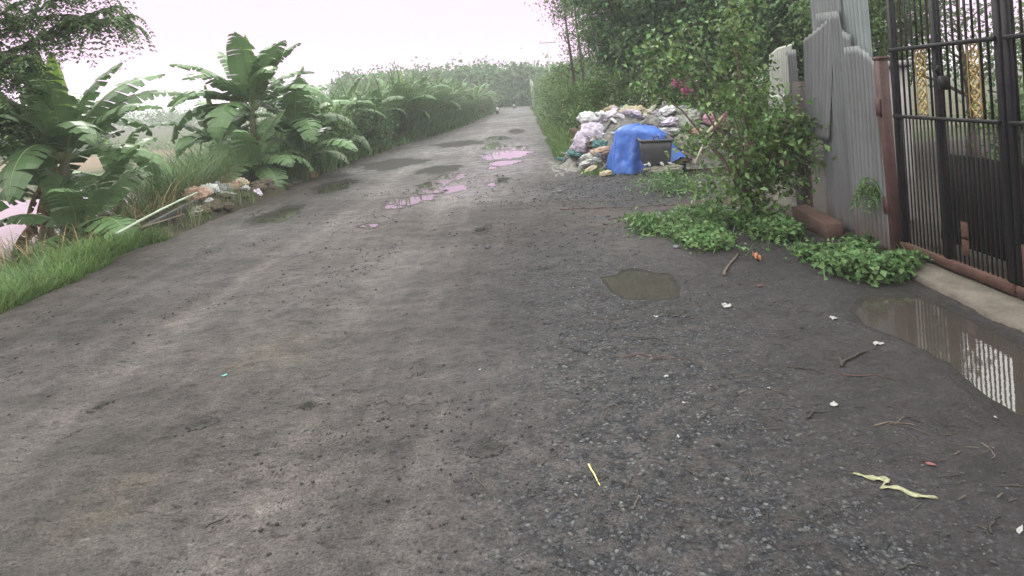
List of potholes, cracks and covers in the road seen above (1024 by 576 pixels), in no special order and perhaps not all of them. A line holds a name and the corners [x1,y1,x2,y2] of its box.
pothole [484,158,527,166]
pothole [186,417,218,432]
pothole [468,442,506,459]
pothole [233,202,314,230]
pothole [412,180,443,190]
pothole [588,265,692,308]
pothole [435,184,473,195]
pothole [381,194,440,208]
pothole [478,141,509,152]
pothole [408,187,448,196]
pothole [474,150,542,161]
pothole [432,172,458,187]
